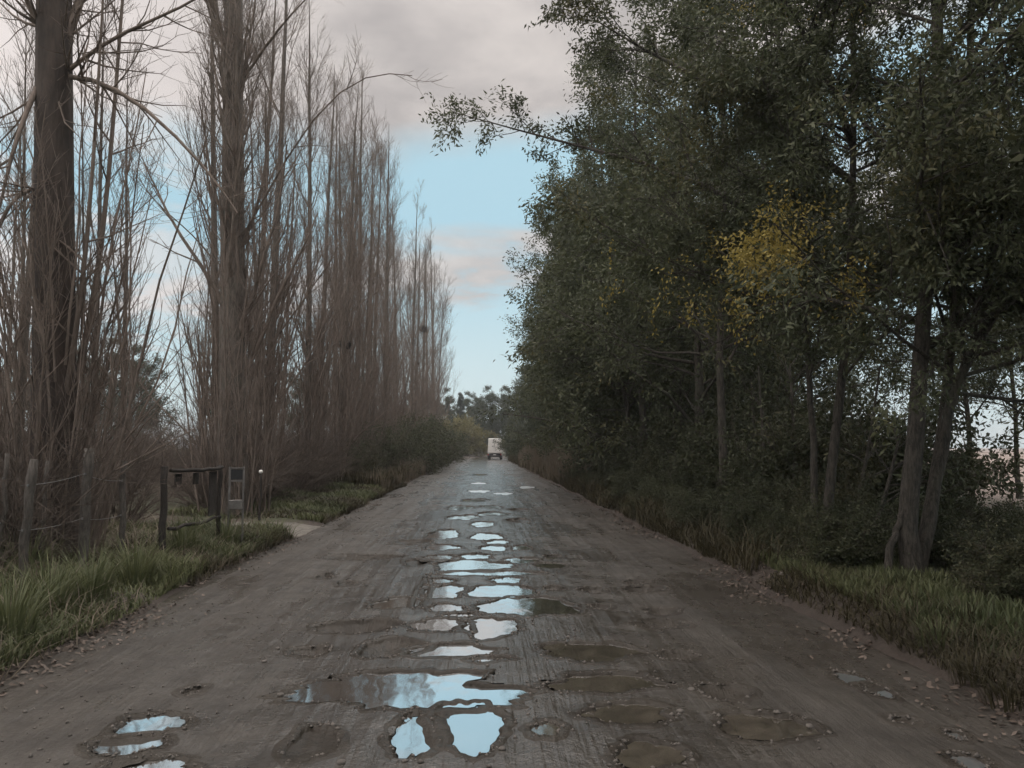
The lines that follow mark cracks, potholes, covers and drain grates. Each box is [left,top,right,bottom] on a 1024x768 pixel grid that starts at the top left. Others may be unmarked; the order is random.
pothole [532,669,682,696]
pothole [466,532,508,542]
pothole [422,528,463,540]
pothole [271,722,351,768]
pothole [416,698,518,763]
pothole [255,667,549,717]
pothole [565,698,683,730]
pothole [397,617,479,635]
pothole [394,639,507,660]
pothole [452,552,497,561]
pothole [455,582,550,600]
